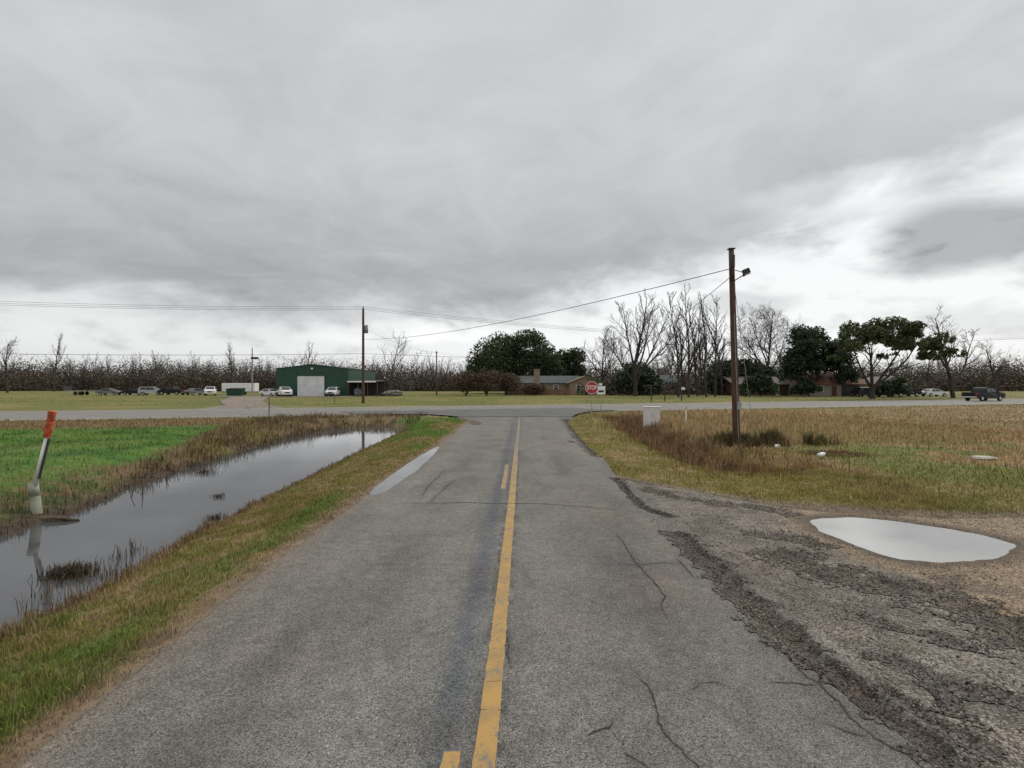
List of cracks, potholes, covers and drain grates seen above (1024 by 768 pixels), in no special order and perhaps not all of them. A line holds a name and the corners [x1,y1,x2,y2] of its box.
crack [587,672,719,768]
crack [617,534,696,615]
crack [423,471,611,510]
